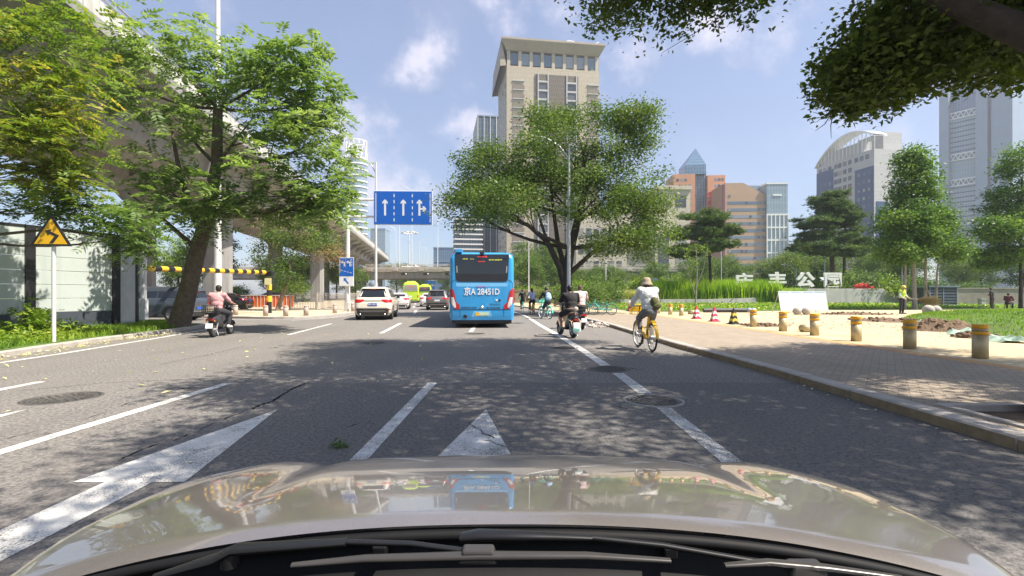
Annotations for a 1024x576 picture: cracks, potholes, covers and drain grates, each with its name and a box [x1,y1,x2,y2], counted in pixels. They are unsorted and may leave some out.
crack [6,342,334,460]
manhole cover [622,394,685,407]
manhole cover [18,391,105,405]
